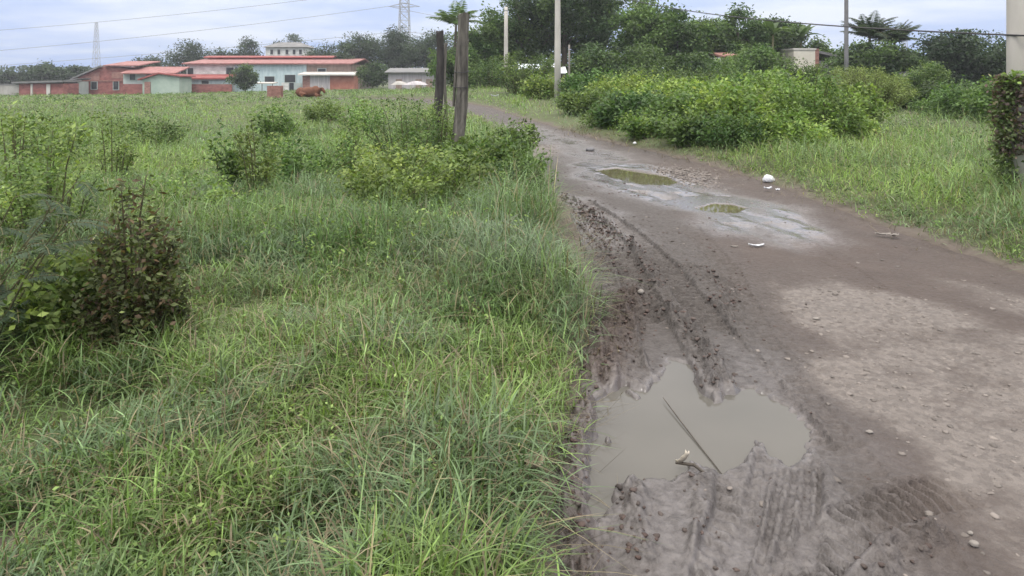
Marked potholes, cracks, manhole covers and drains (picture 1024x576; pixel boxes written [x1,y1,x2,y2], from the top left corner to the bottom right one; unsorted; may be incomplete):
pothole [688,202,755,214]
pothole [591,166,684,187]
pothole [570,354,826,533]
